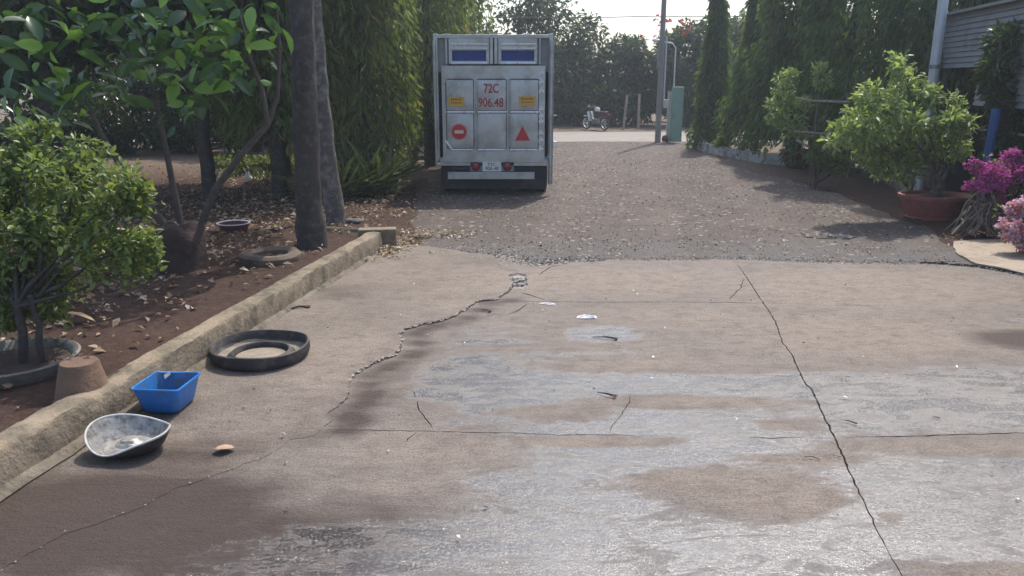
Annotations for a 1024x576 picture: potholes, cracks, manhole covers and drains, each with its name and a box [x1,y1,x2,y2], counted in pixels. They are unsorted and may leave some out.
pothole [509,274,529,290]
crack [348,267,1010,575]
crack [1,256,541,570]
